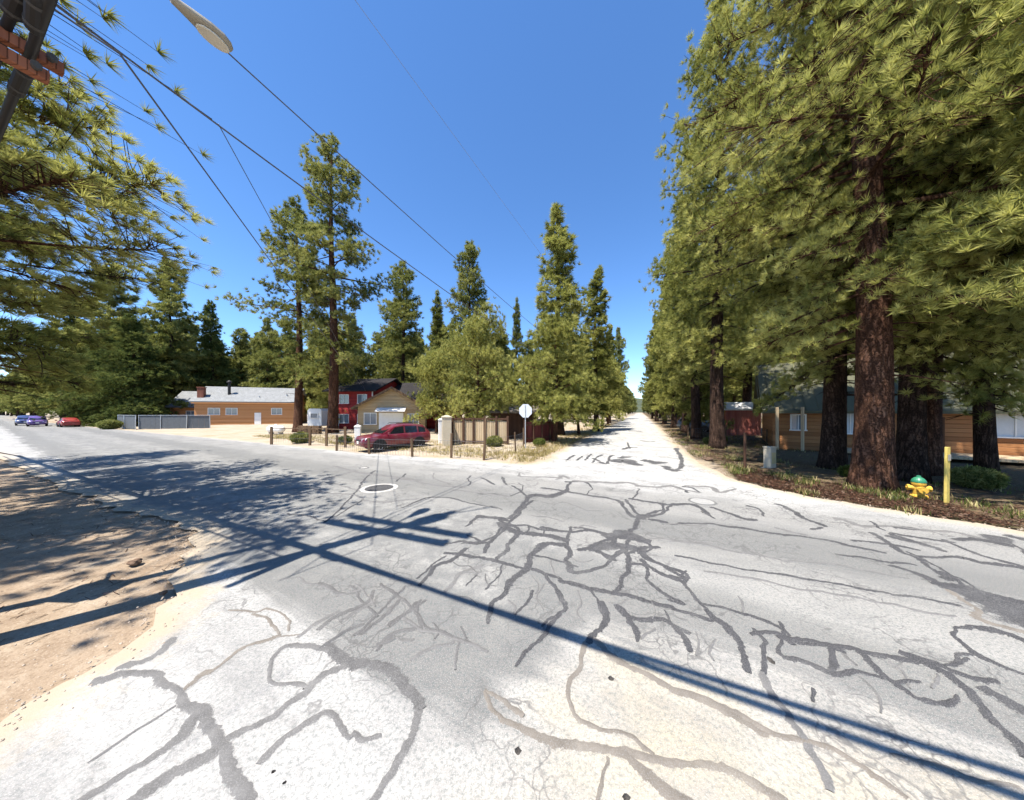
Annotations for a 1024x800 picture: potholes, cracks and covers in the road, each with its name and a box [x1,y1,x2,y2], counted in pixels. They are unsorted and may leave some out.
manhole cover [360,484,398,493]
crack [77,466,1024,800]
